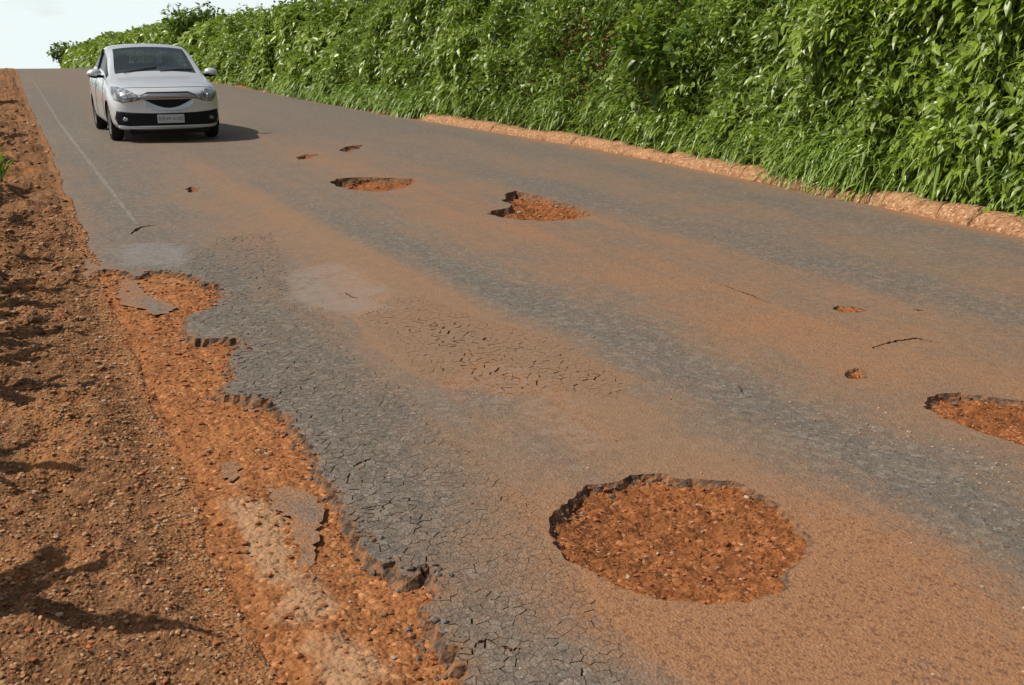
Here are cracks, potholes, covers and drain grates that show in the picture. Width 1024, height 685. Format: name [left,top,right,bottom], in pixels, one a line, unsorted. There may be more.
pothole [549,473,814,605]
crack [872,337,933,349]
pothole [330,177,416,192]
pothole [923,392,1024,446]
crack [194,232,633,685]
pothole [844,368,869,380]
pothole [832,305,867,313]
pothole [488,190,595,221]
